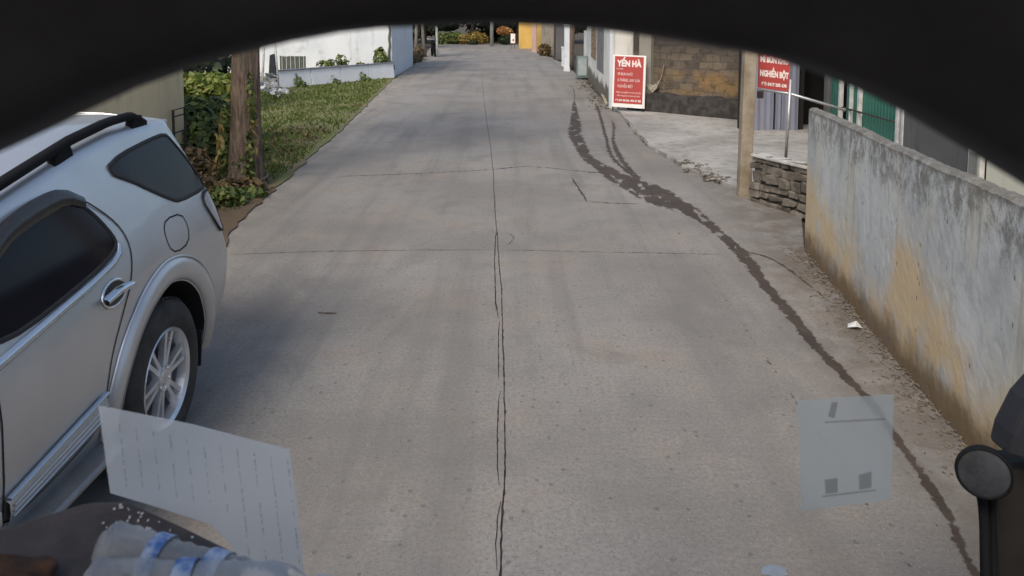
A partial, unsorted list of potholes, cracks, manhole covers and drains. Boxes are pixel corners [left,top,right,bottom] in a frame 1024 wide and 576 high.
crack [235,81,722,576]
